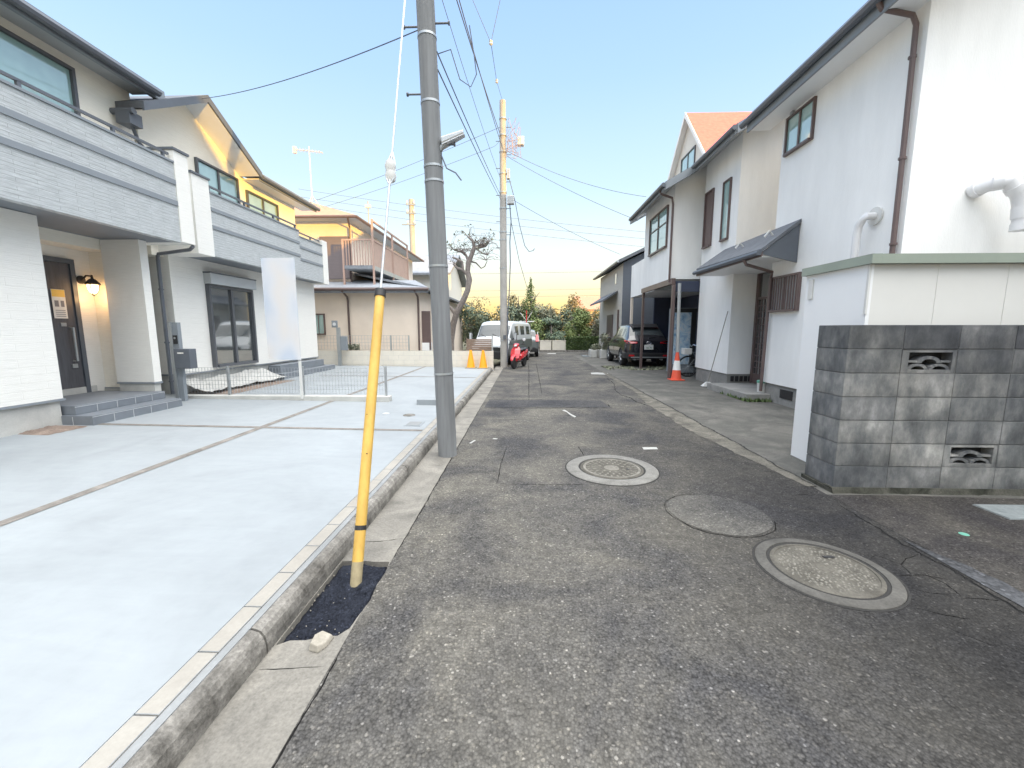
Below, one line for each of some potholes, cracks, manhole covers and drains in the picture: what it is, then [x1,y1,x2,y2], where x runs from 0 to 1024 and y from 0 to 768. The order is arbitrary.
manhole cover [565,455,660,486]
crack [841,506,1024,619]
manhole cover [752,538,911,612]
